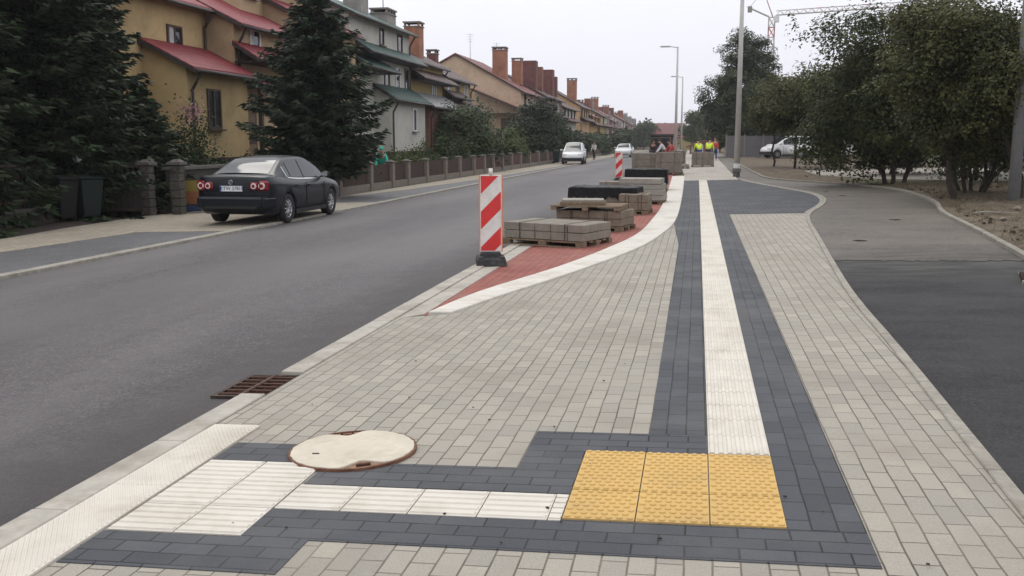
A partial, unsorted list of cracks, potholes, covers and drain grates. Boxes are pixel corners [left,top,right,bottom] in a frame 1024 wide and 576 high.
drain grate [210,374,300,399]
manhole cover [288,430,417,472]
